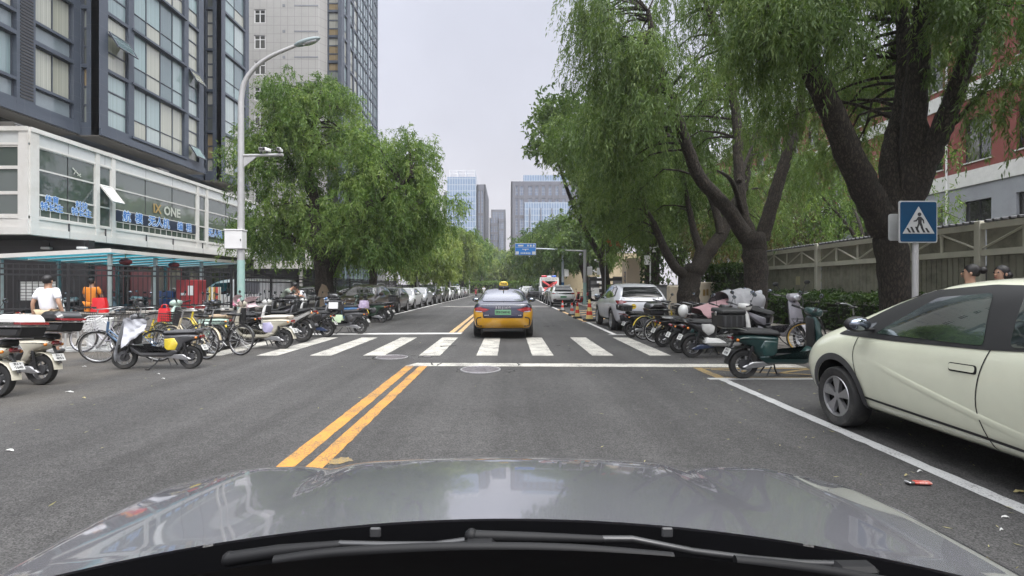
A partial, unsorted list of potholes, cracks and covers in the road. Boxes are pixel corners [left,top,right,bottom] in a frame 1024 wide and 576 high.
manhole cover [460,366,501,374]
